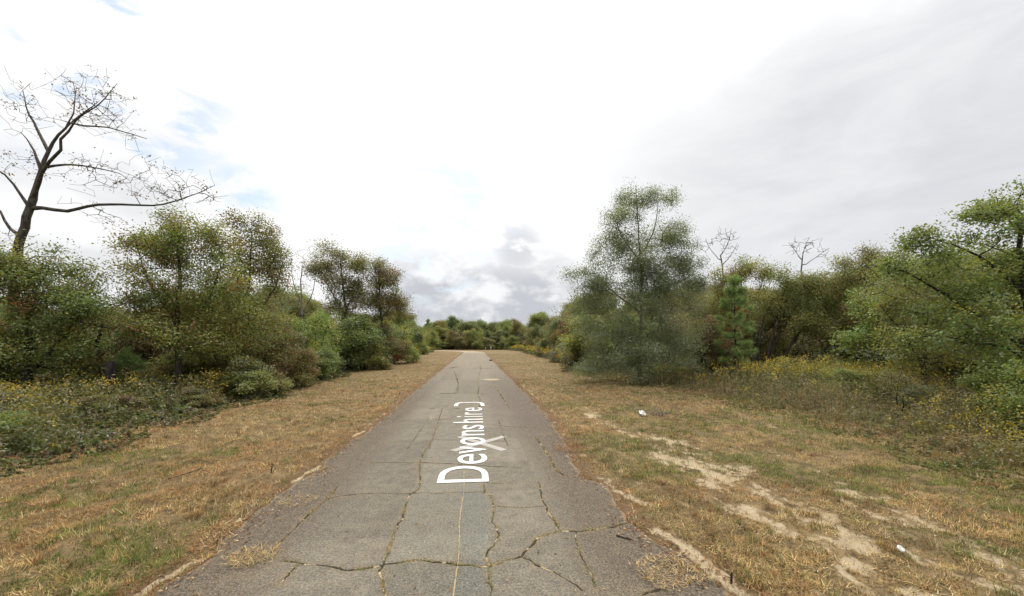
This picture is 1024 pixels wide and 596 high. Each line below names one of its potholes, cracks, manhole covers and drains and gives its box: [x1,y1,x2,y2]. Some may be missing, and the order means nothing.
crack [270,367,625,596]
